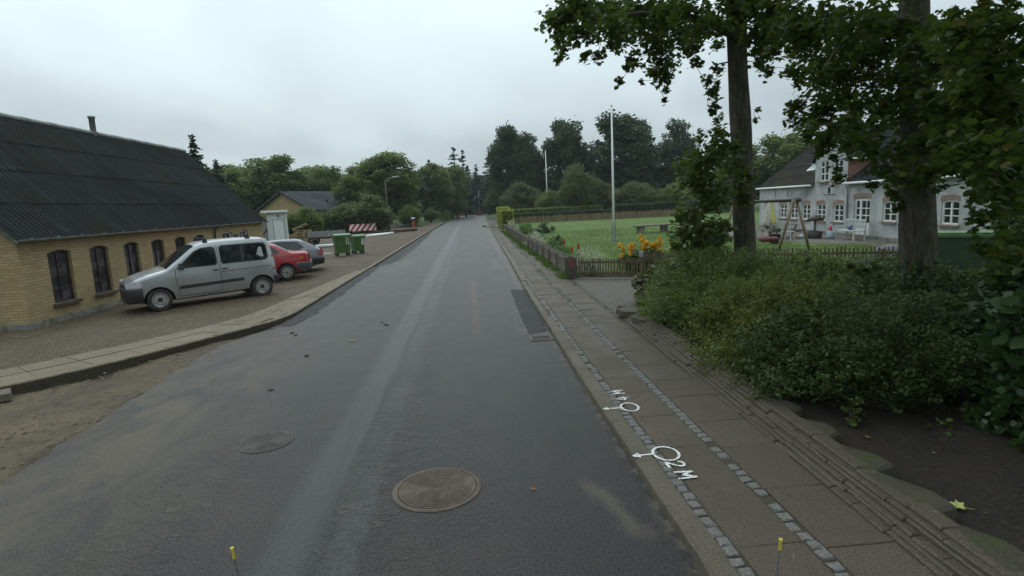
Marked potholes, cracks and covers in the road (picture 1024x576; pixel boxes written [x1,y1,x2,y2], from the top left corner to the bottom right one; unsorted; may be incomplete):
manhole cover [238,431,294,454]
manhole cover [392,467,482,513]
